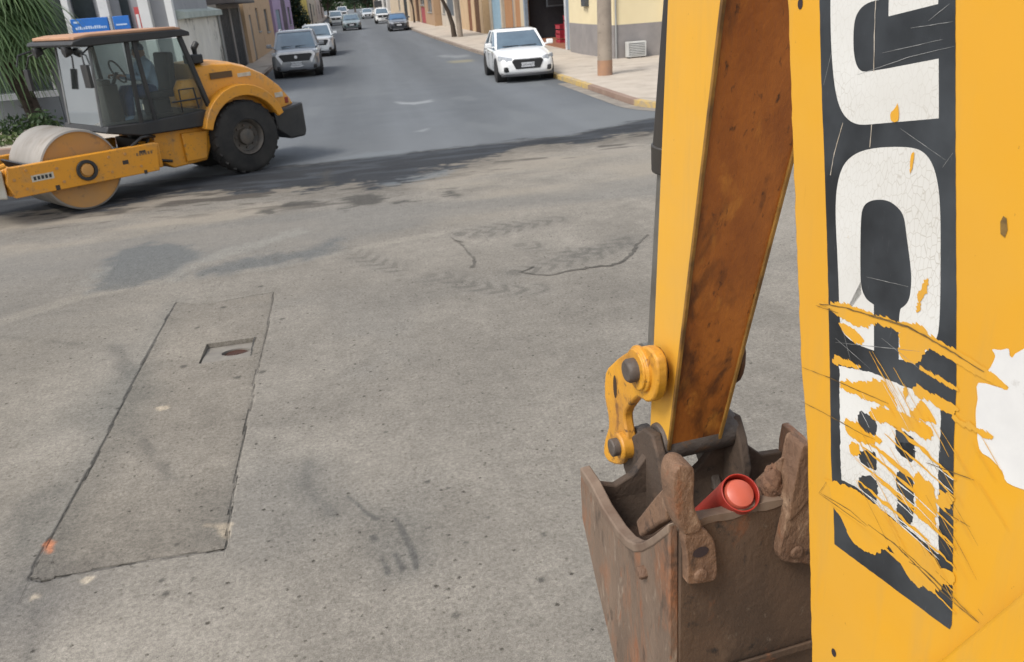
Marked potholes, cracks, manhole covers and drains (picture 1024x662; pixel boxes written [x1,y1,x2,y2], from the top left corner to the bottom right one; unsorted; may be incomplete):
crack [521,234,649,275]
crack [451,237,477,268]
manhole cover [202,337,256,363]
